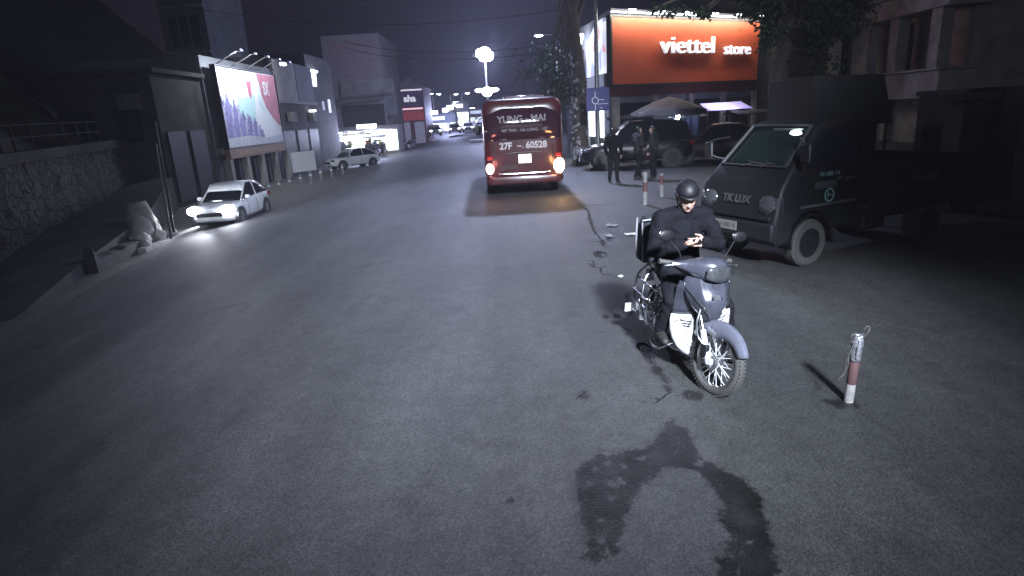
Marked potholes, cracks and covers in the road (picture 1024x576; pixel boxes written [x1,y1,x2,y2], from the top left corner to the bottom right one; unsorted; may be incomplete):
crack [571,203,618,275]
